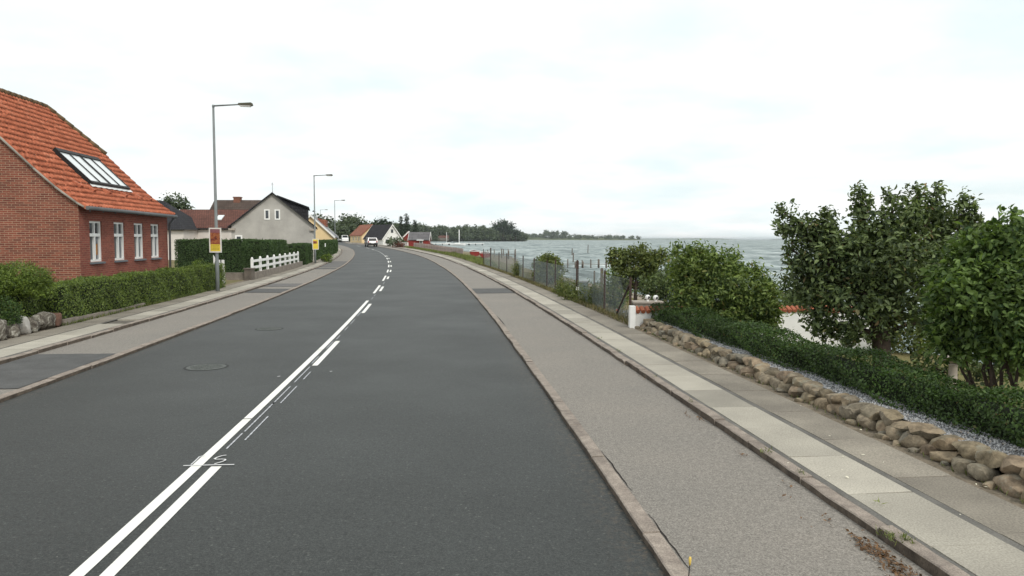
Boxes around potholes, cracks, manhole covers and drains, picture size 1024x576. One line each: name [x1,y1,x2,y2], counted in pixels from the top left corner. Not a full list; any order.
crack [648,514,691,570]
manhole cover [183,363,229,371]
